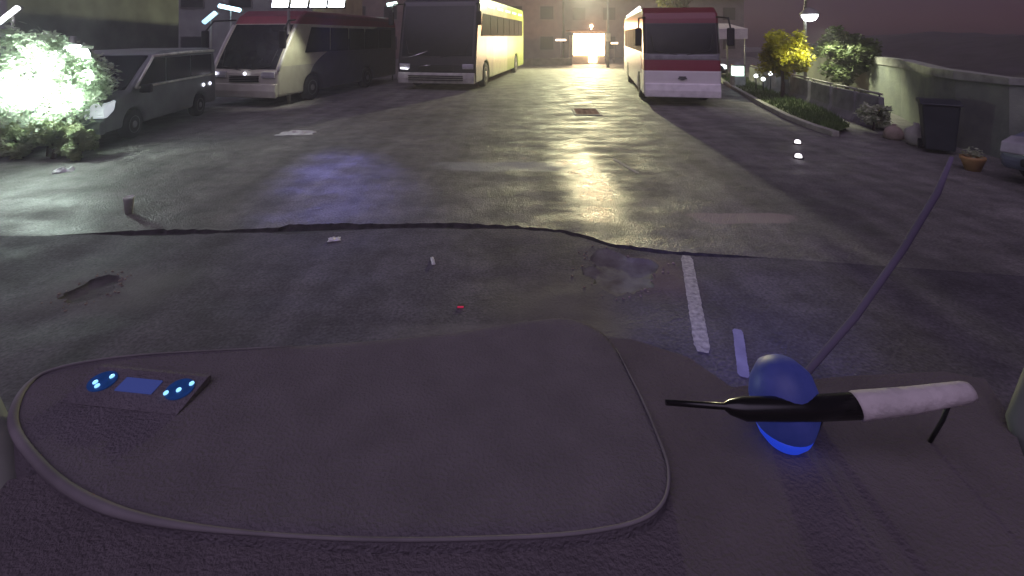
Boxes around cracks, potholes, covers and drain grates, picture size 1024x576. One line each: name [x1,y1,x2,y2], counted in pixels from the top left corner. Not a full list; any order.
pothole [41,270,132,312]
pothole [571,245,675,300]
crack [54,223,767,258]
